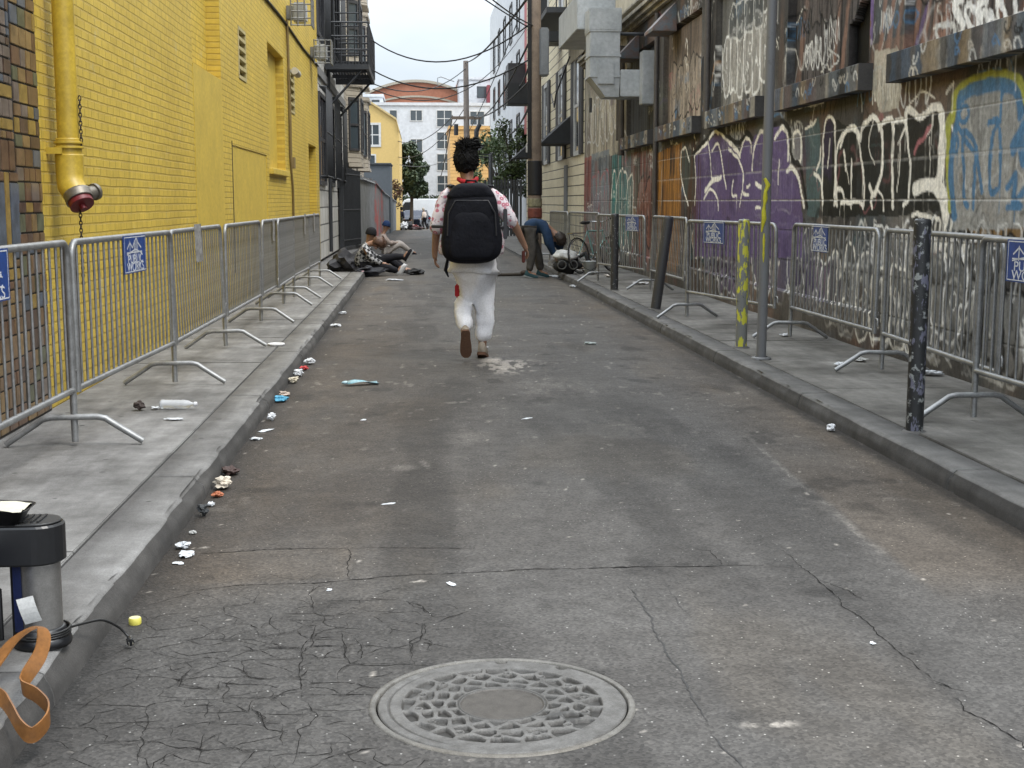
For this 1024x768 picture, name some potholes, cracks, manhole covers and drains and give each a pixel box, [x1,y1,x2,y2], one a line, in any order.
crack [192,548,781,591]
manhole cover [368,658,636,758]
crack [785,552,1024,747]
